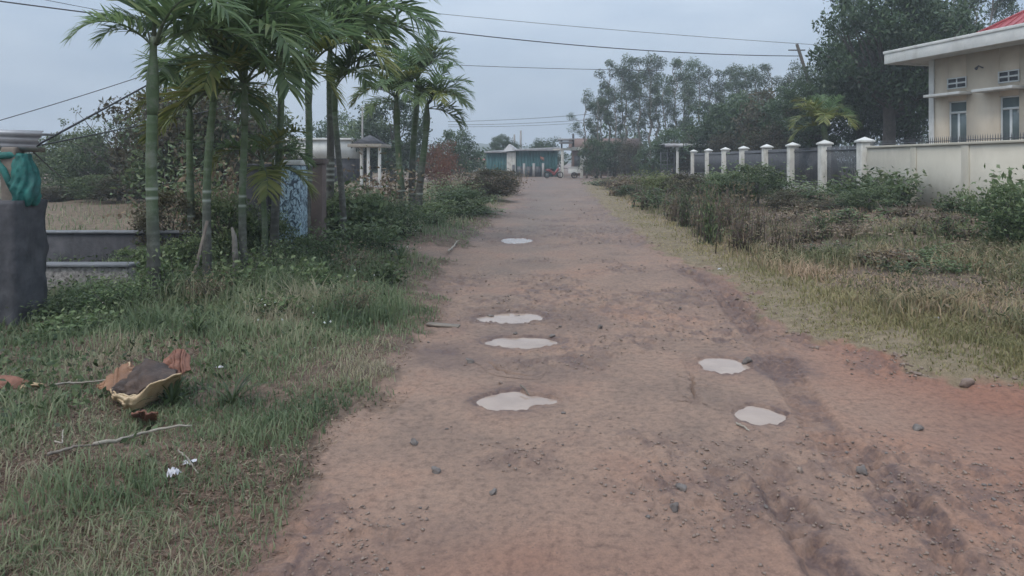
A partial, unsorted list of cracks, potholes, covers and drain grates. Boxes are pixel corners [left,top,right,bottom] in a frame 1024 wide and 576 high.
pothole [461,329,582,354]
pothole [453,380,571,421]
pothole [719,397,804,433]
pothole [487,236,544,247]
pothole [453,304,572,329]
pothole [680,350,767,384]
